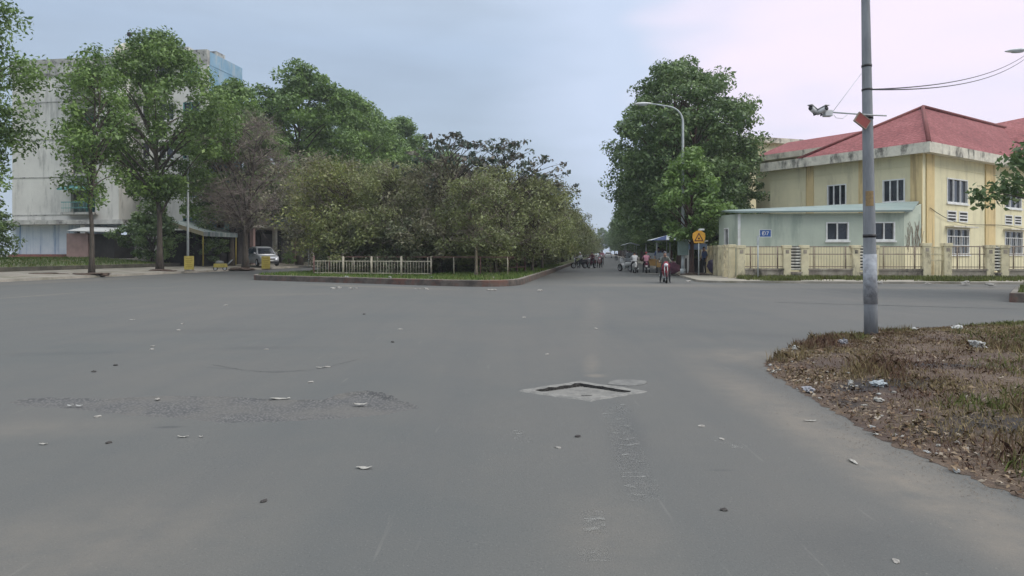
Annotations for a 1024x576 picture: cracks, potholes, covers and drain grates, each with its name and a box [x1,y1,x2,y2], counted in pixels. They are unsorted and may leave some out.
manhole cover [520,381,647,402]
